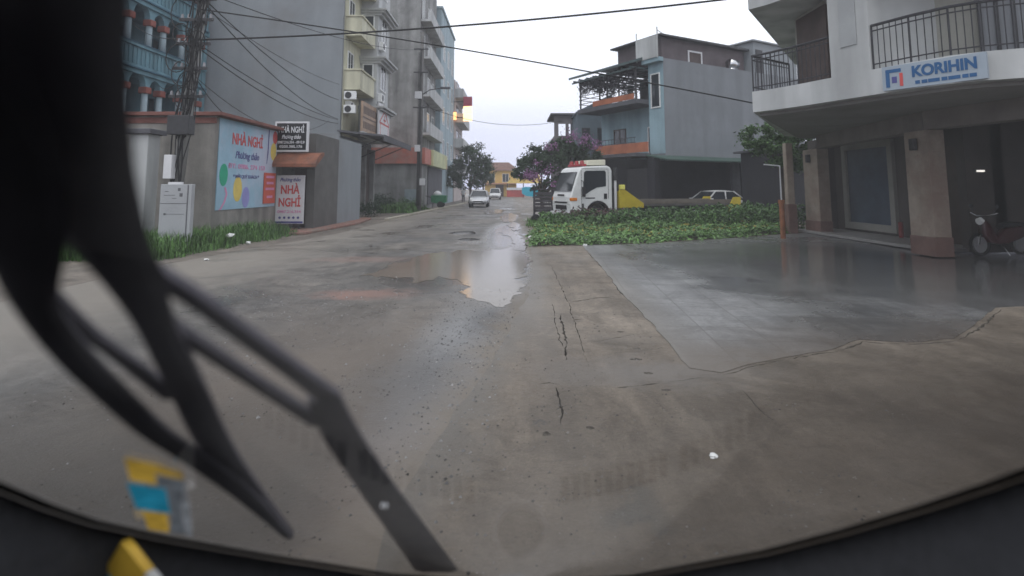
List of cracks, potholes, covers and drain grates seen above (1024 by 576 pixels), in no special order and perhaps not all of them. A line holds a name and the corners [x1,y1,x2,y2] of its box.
crack [541,382,566,423]
crack [552,305,579,360]
